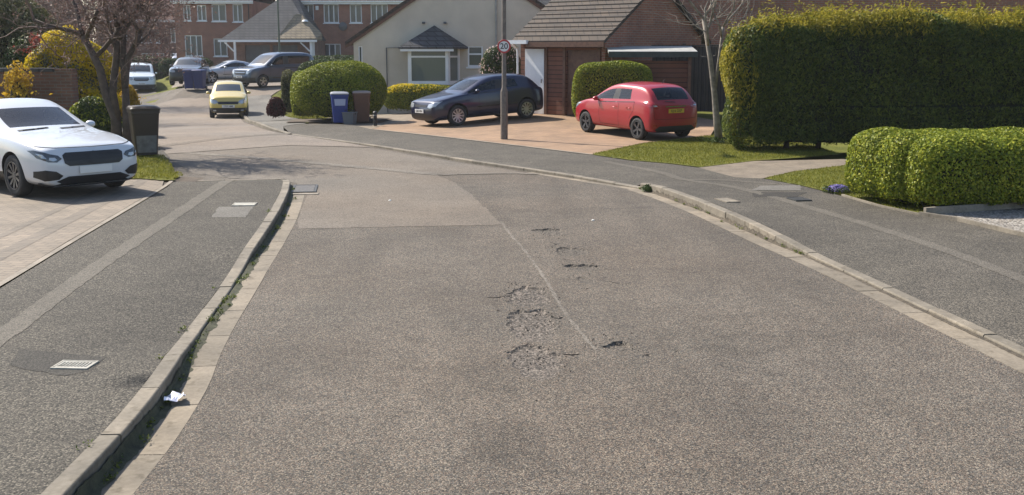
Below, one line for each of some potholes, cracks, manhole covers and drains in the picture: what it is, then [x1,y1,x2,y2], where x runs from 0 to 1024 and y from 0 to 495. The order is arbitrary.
pothole [601,341,634,351]
pothole [506,344,564,381]
pothole [555,247,589,256]
pothole [564,264,600,272]
drain grate [291,184,318,193]
pothole [505,309,557,343]
pothole [505,286,551,308]
